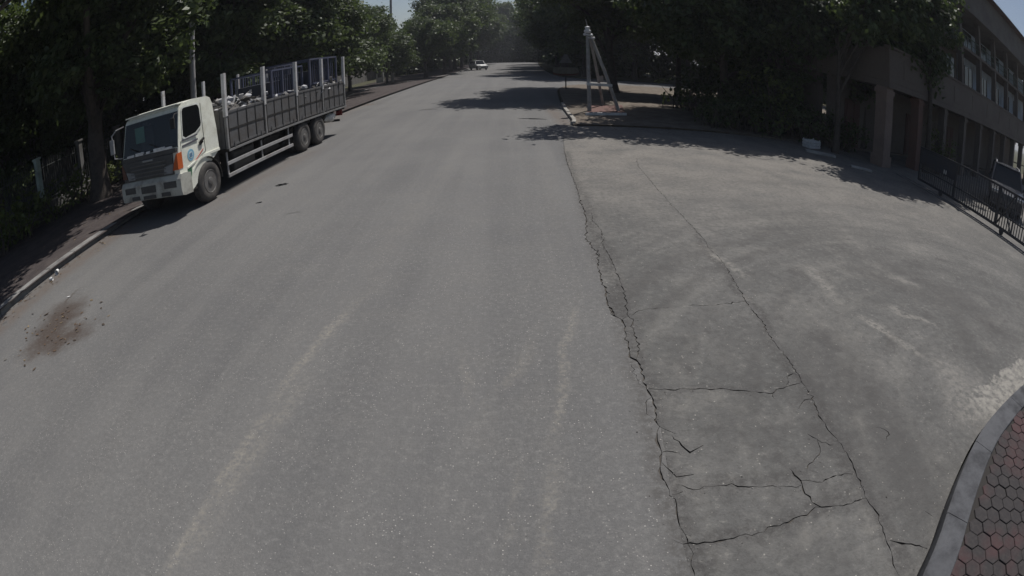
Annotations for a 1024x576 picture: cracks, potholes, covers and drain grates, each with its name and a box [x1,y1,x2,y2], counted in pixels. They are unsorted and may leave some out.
crack [563,136,865,575]
